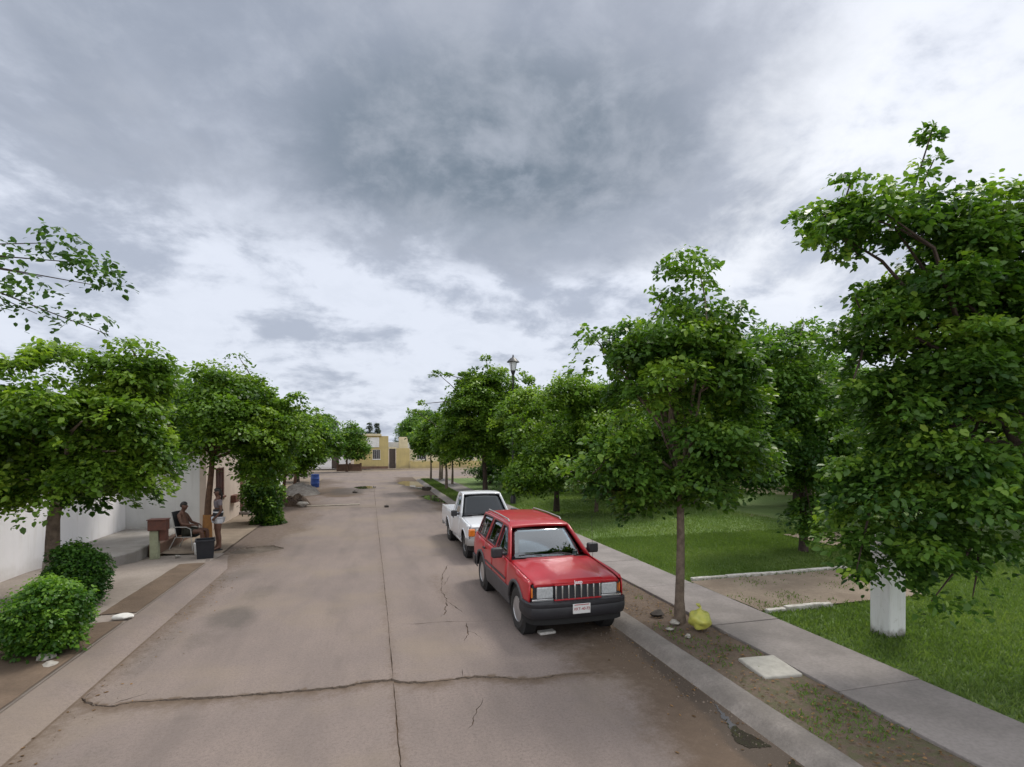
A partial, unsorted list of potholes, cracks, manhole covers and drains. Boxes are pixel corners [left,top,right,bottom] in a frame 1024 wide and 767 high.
crack [81,493,605,767]
